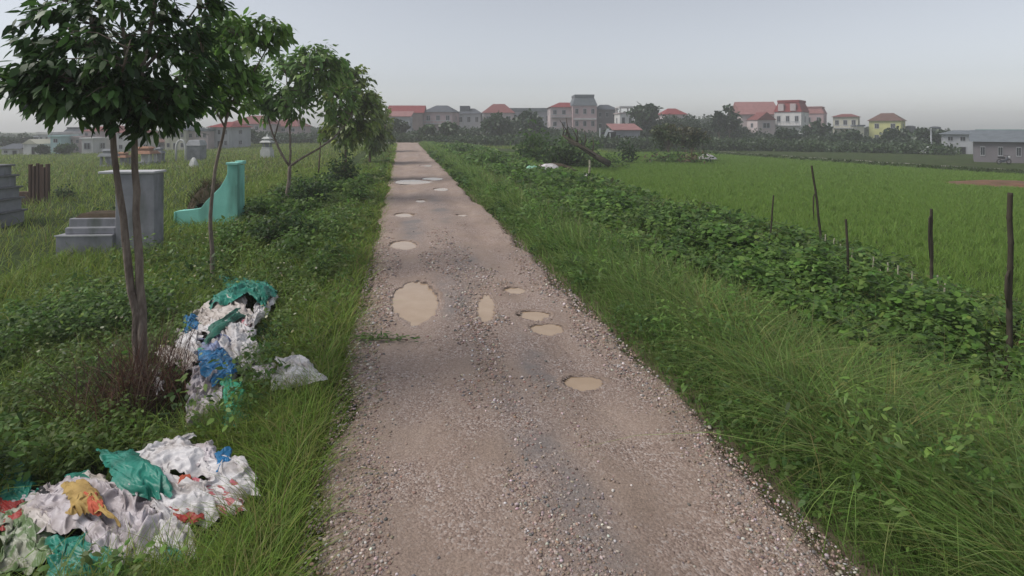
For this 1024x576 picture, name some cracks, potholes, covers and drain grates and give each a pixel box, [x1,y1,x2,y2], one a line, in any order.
pothole [498,285,531,295]
pothole [386,277,445,333]
pothole [510,309,556,323]
pothole [523,322,570,338]
pothole [555,372,612,394]
pothole [474,290,499,325]
pothole [385,239,422,252]
